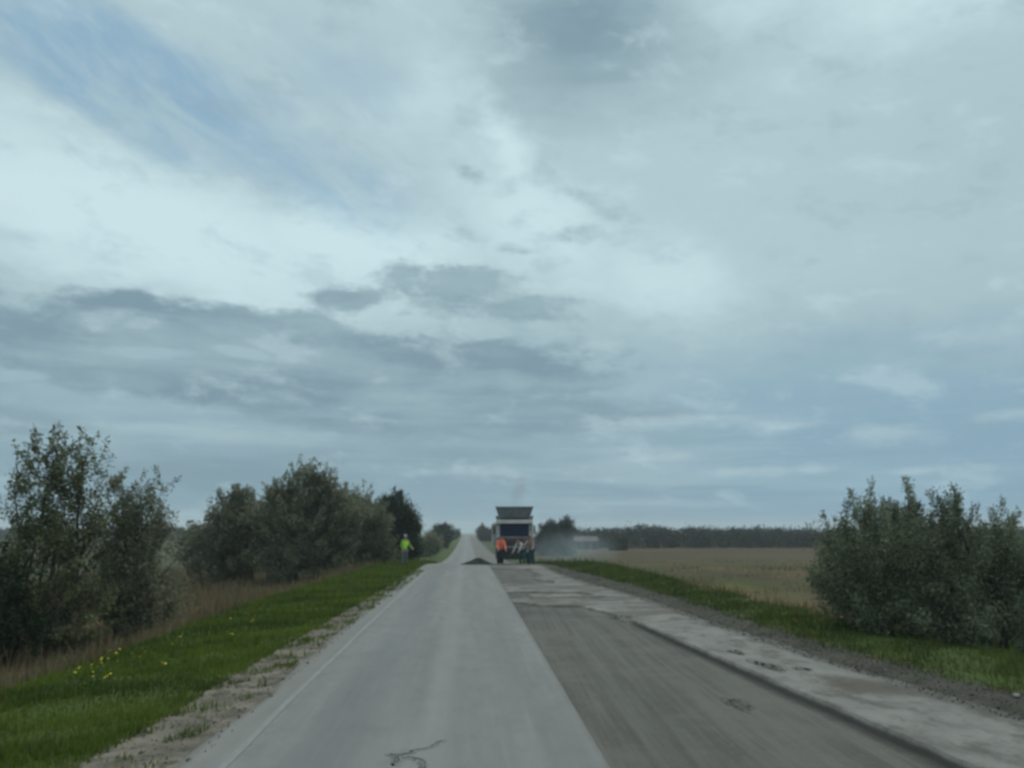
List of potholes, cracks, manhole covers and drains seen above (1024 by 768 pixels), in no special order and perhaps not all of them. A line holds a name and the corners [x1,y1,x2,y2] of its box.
pothole [719,697,756,714]
crack [386,740,445,768]
